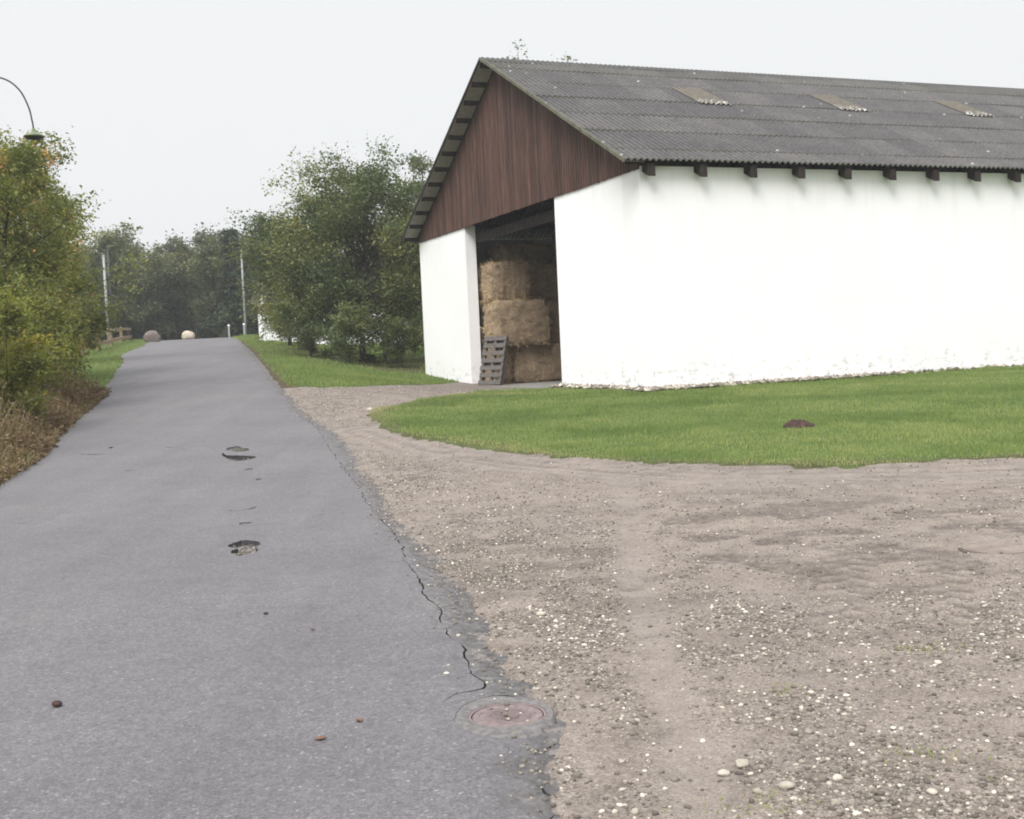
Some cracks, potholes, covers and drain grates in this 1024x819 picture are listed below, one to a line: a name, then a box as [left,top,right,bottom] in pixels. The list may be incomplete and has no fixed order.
pothole [228,540,261,556]
pothole [222,452,256,461]
crack [296,414,499,702]
manhole cover [454,695,558,739]
